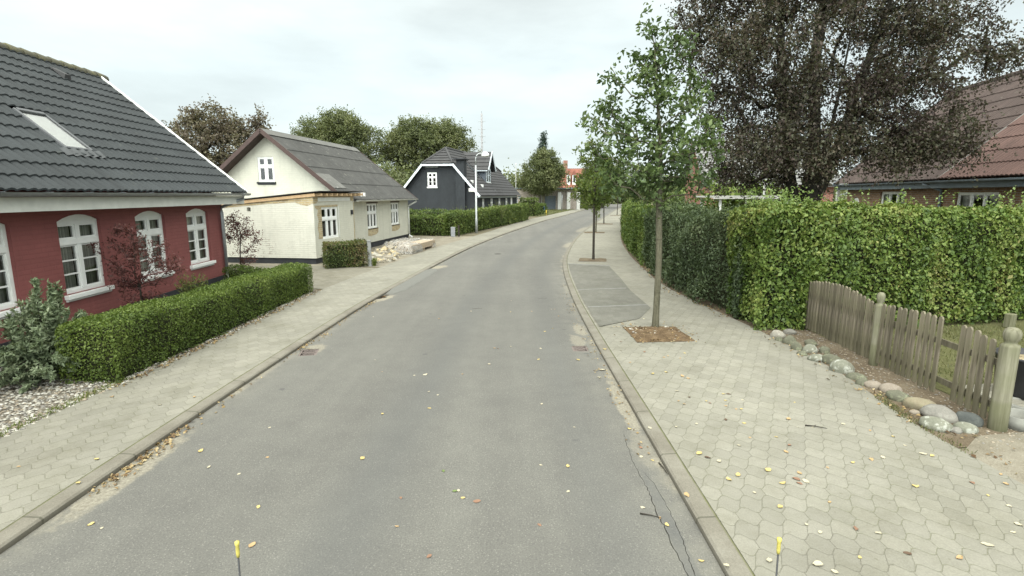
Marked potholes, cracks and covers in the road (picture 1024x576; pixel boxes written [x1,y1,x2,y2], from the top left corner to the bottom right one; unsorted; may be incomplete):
crack [624,436,695,576]
